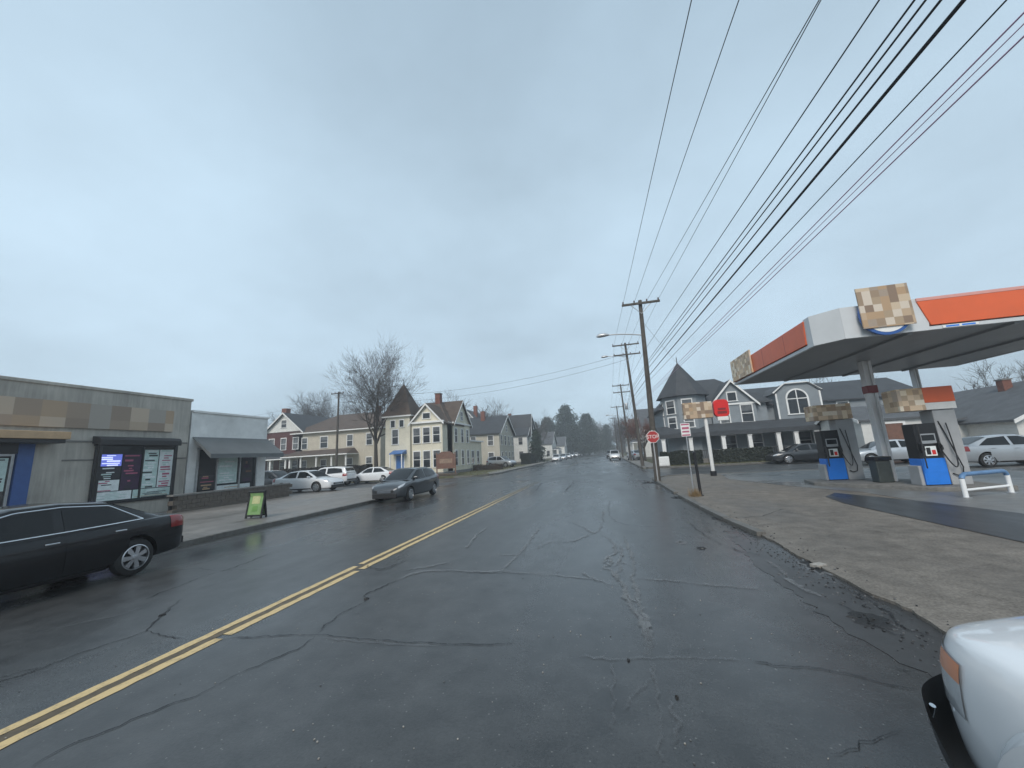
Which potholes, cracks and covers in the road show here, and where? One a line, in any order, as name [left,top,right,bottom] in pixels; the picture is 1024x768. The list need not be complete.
crack [841,731,895,753]
crack [50,512,737,755]
crack [1,558,257,681]
crack [847,594,924,635]
crack [757,661,907,688]
